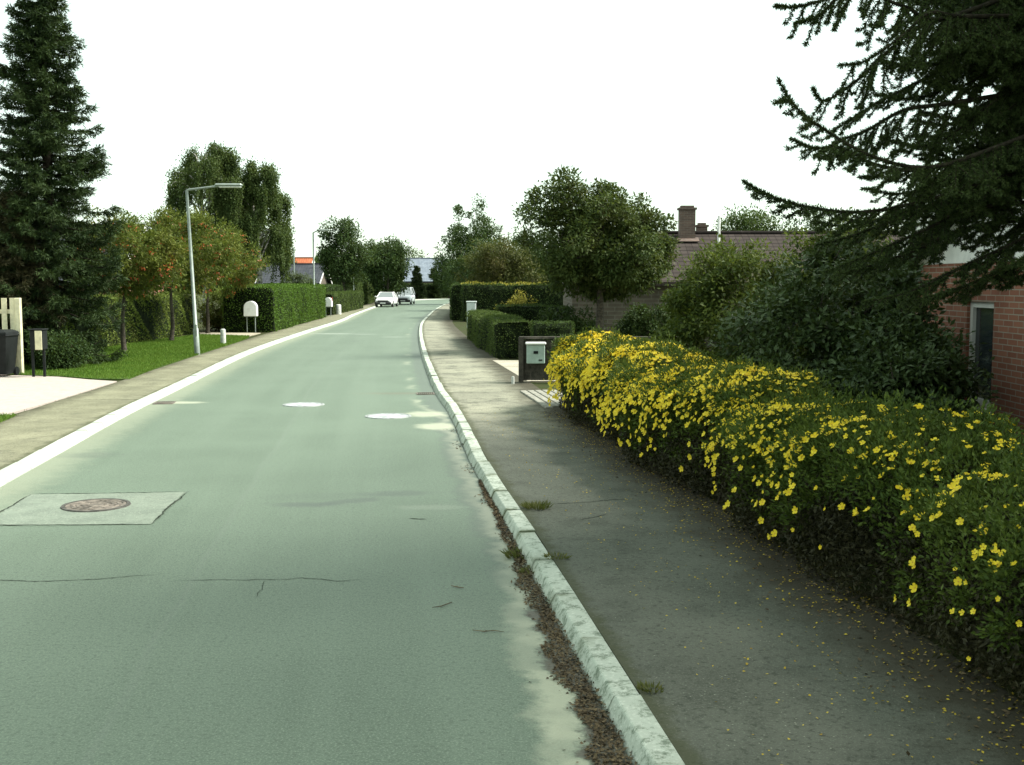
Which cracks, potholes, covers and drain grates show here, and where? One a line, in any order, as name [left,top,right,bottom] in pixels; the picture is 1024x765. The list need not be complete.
manhole cover [60,498,131,512]
crack [210,577,361,596]
